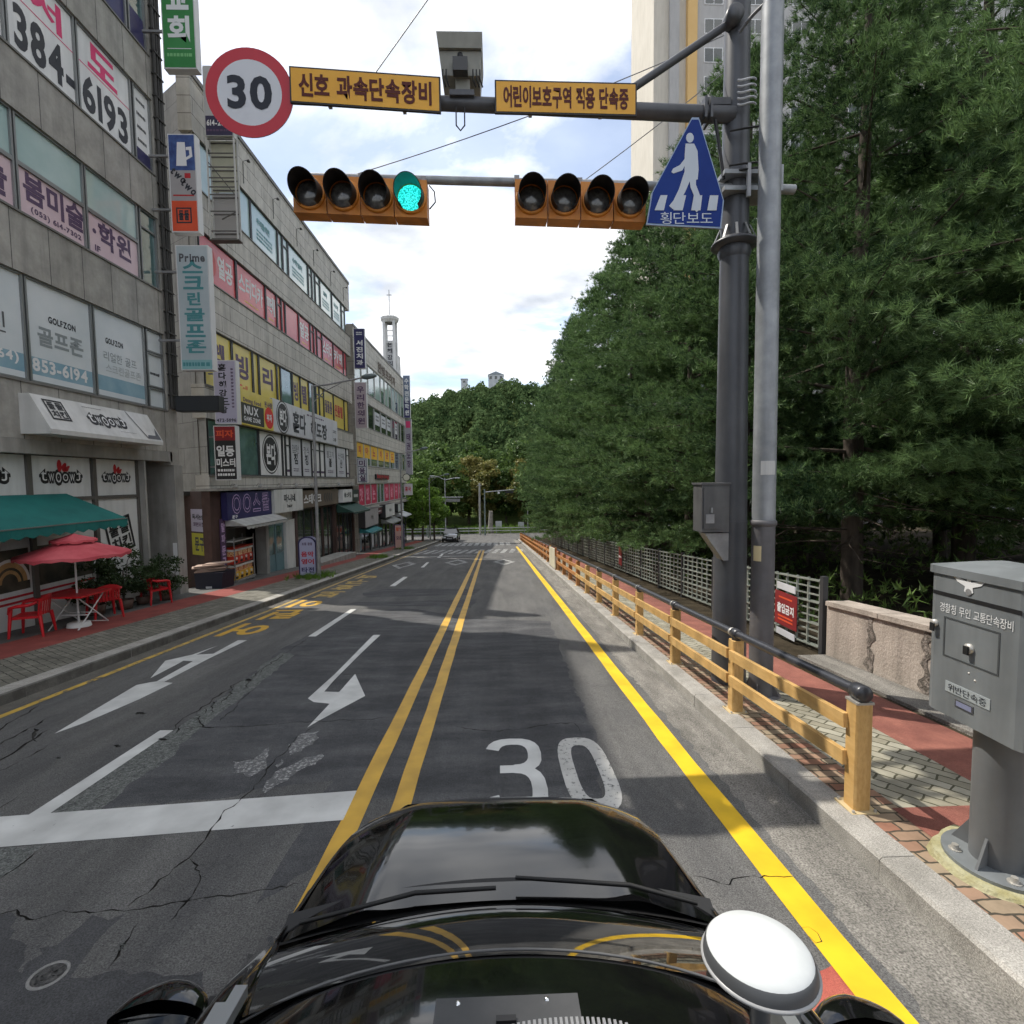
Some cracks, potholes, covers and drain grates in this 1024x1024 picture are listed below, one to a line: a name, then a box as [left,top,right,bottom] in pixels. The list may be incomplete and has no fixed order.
crack [698,876,768,885]
crack [1,641,377,966]
manhole cover [25,960,71,991]
